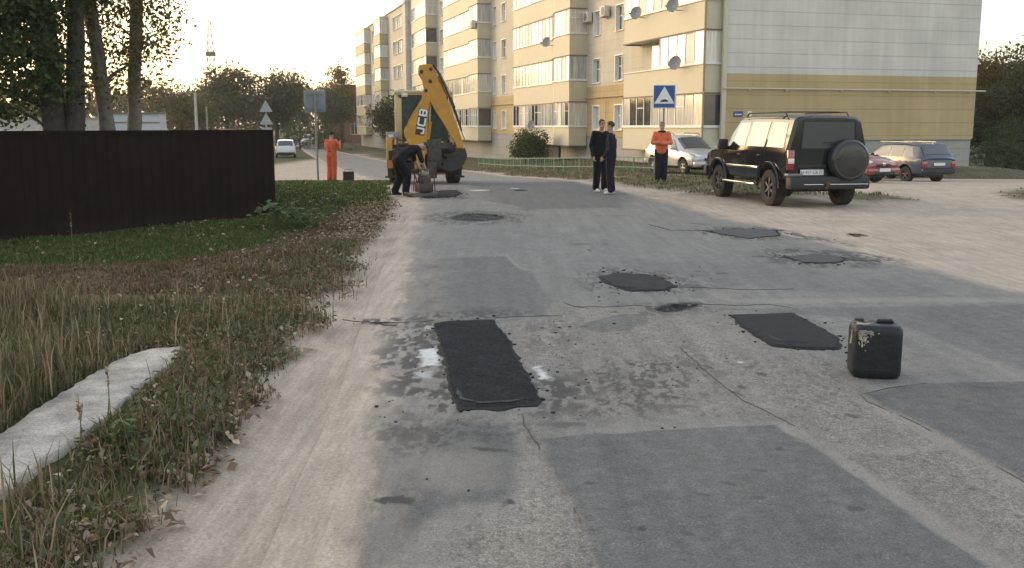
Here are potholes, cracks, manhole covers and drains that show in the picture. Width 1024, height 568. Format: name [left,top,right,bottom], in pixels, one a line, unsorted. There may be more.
crack [680,348,794,426]
pothole [652,302,702,313]
crack [522,414,582,525]
